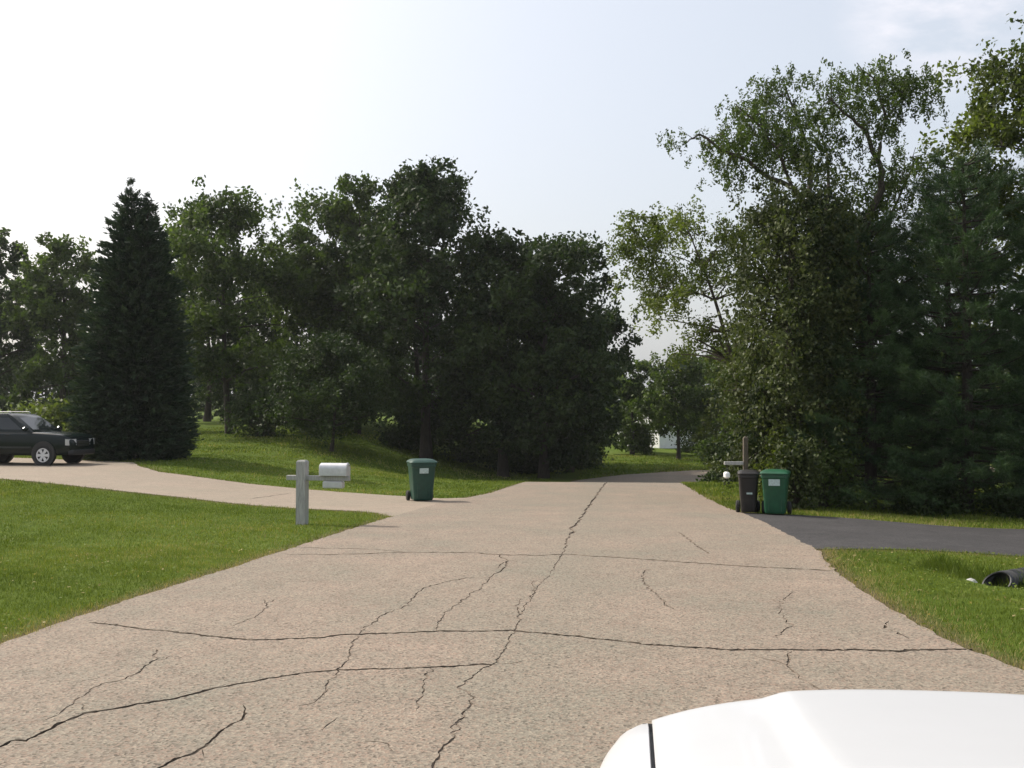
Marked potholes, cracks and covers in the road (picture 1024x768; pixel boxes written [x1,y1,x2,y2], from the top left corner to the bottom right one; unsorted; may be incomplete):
crack [0,483,972,768]
